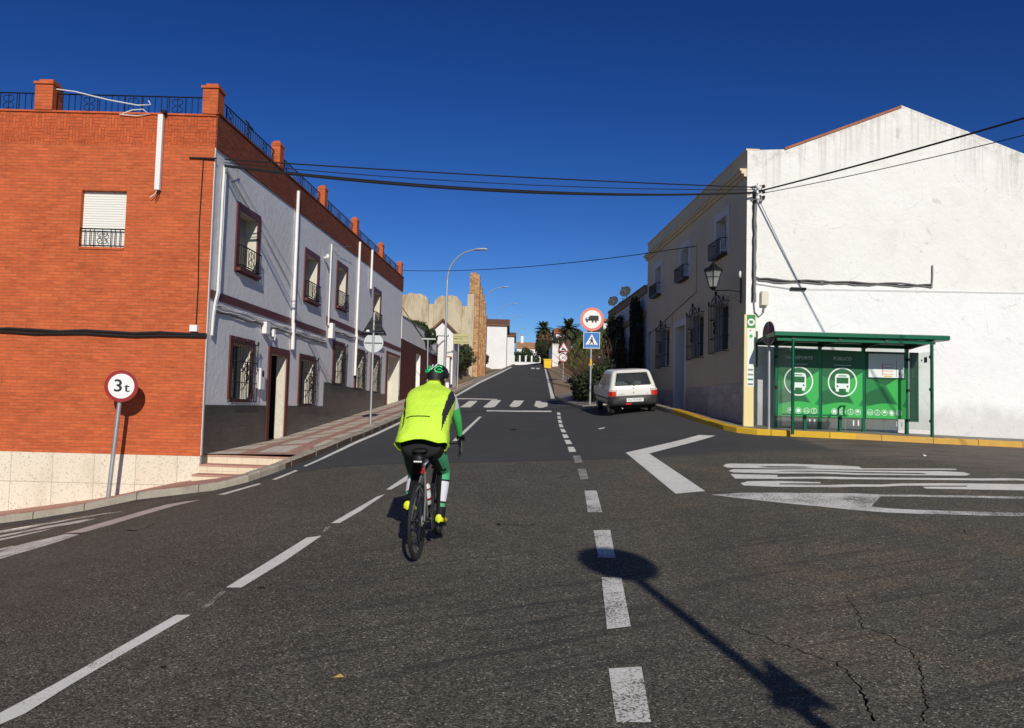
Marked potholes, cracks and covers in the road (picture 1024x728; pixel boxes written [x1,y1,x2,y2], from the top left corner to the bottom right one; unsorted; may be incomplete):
crack [846,595,929,722]
crack [731,622,875,722]
